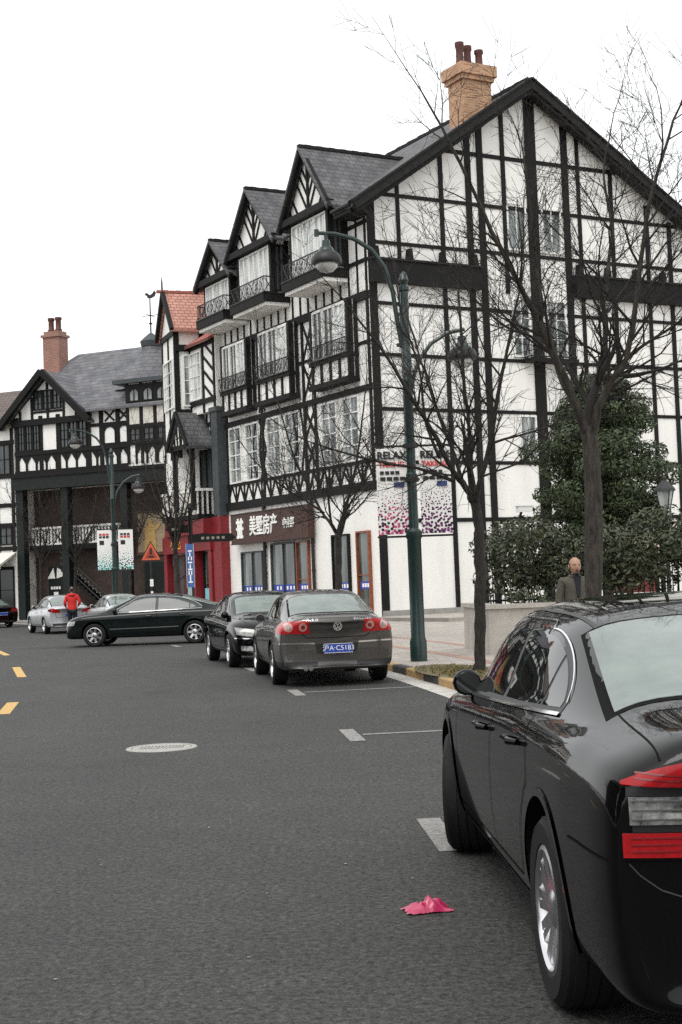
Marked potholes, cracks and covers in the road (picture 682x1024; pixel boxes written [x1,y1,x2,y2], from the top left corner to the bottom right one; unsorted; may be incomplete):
manhole cover [126,743,197,752]
